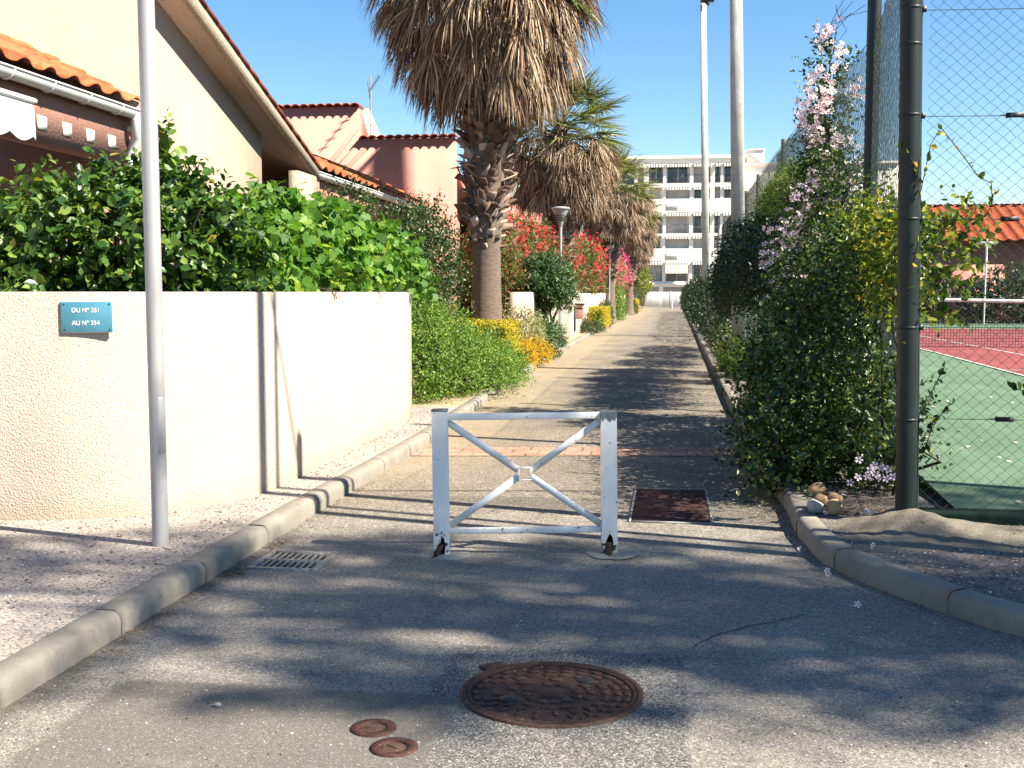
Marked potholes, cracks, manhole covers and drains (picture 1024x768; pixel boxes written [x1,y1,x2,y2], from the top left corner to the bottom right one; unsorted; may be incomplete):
manhole cover [460,661,644,729]
utility cover [370,737,418,758]
utility cover [628,488,713,525]
crack [688,612,807,649]
drain grate [245,550,339,571]
utility cover [350,718,396,738]
